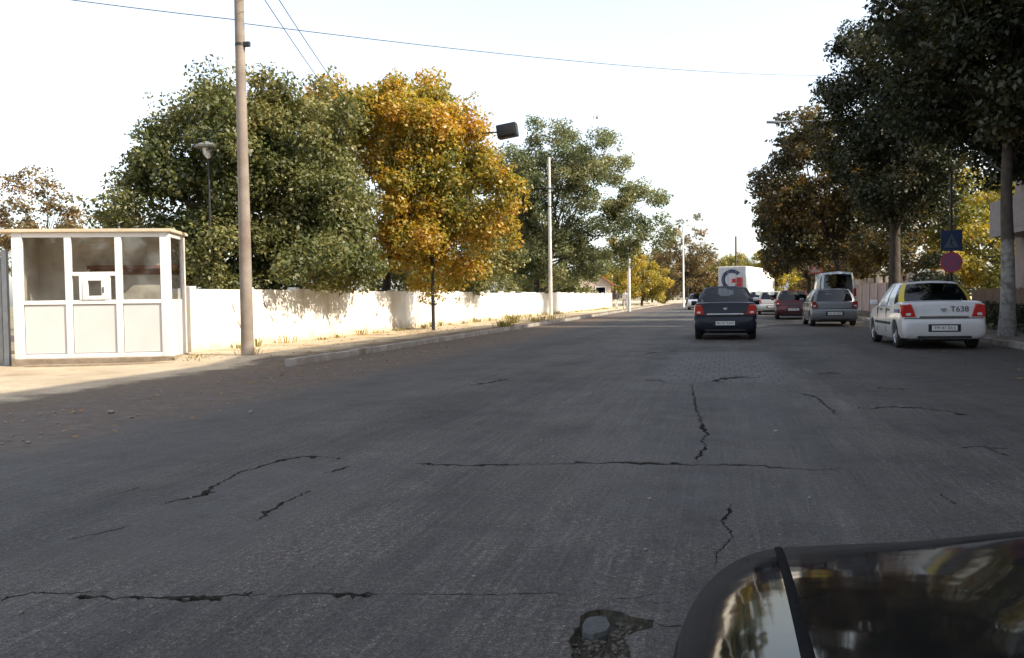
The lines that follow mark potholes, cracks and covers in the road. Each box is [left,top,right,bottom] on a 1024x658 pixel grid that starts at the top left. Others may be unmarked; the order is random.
crack [714,504,733,566]
crack [418,384,843,470]
crack [161,456,350,505]
crack [858,387,968,416]
pothole [568,609,654,658]
crack [0,591,567,603]
crack [258,491,310,520]
